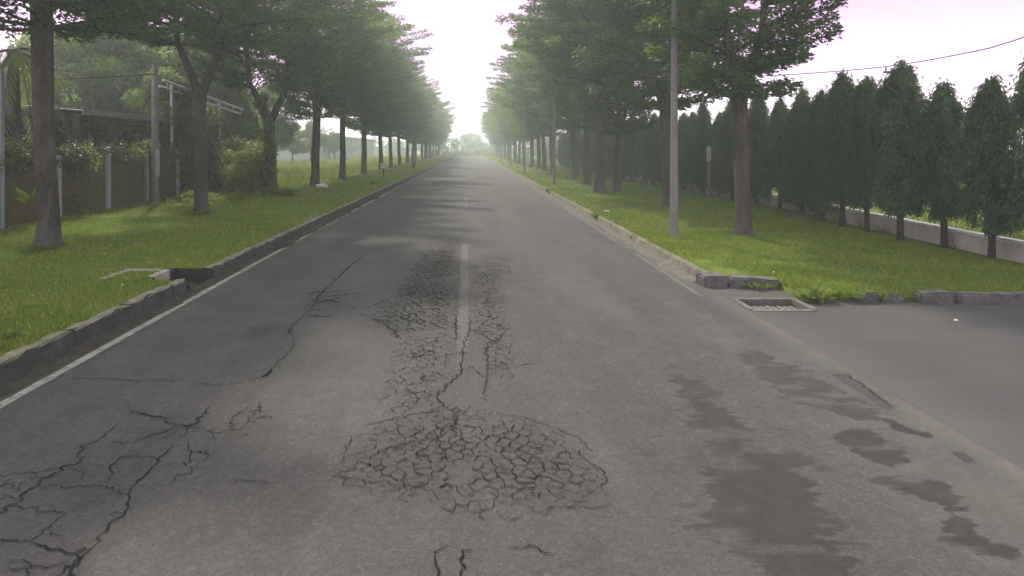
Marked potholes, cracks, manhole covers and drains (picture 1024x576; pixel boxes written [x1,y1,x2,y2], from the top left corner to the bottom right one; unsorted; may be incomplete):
crack [0,401,273,576]
crack [200,257,361,385]
drain grate [99,268,214,291]
crack [327,238,611,522]
crack [434,544,472,576]
